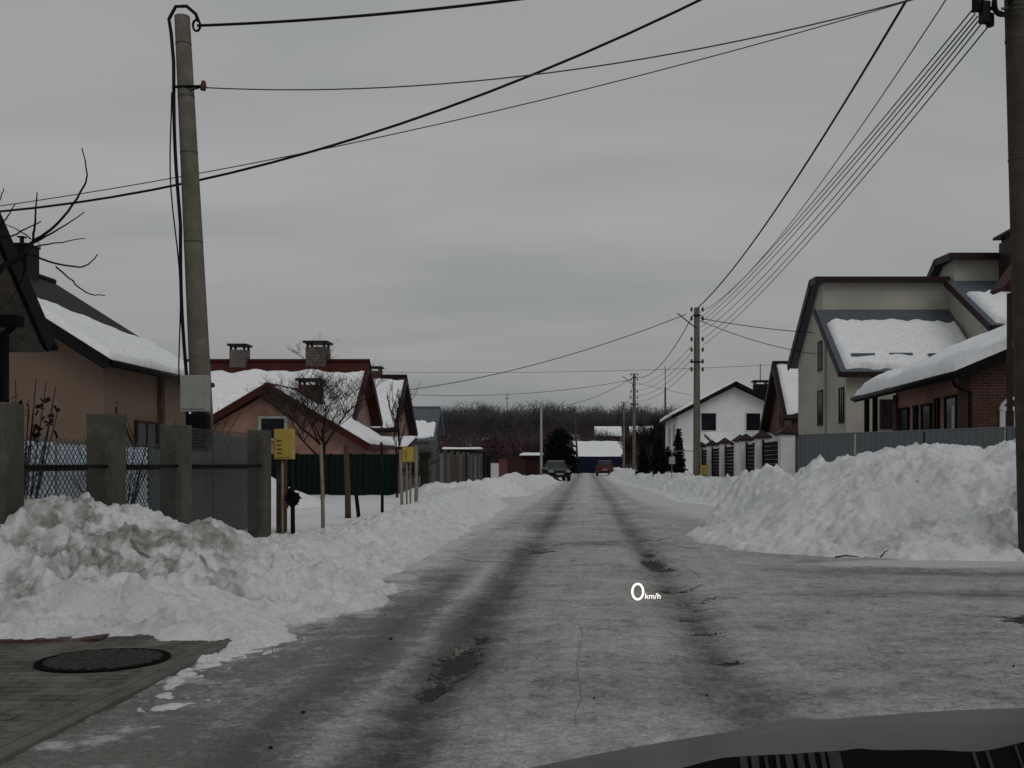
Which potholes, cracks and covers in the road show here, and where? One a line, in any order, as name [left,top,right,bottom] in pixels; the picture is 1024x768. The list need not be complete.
pothole [473,633,491,645]
pothole [639,557,668,571]
pothole [414,683,453,702]
pothole [425,648,485,688]
crack [455,538,732,601]
manhole cover [33,648,171,673]
